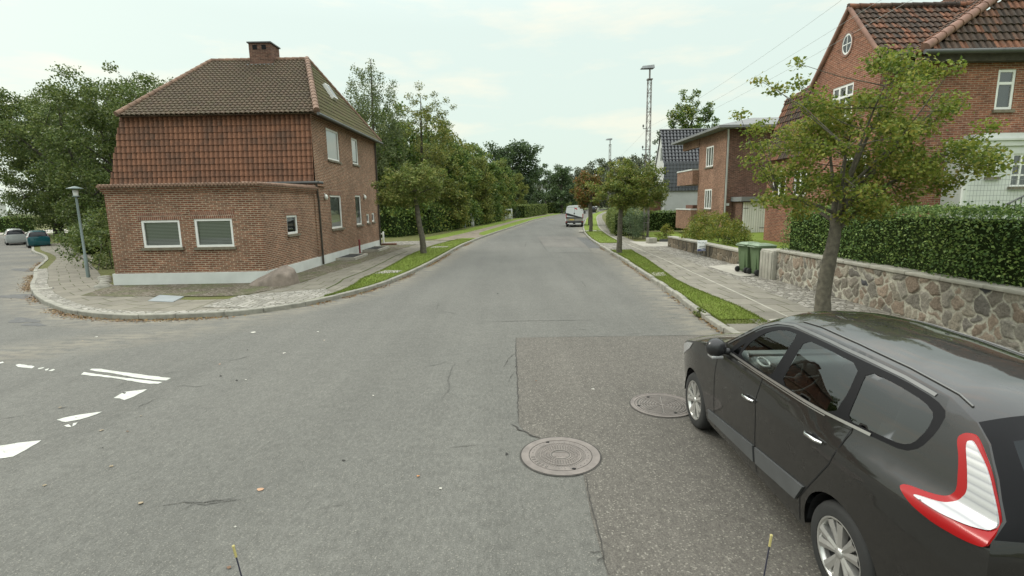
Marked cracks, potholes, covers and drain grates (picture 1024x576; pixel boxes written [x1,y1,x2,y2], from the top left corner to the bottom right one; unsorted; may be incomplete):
manhole cover [520,437,602,477]
manhole cover [629,393,689,418]
